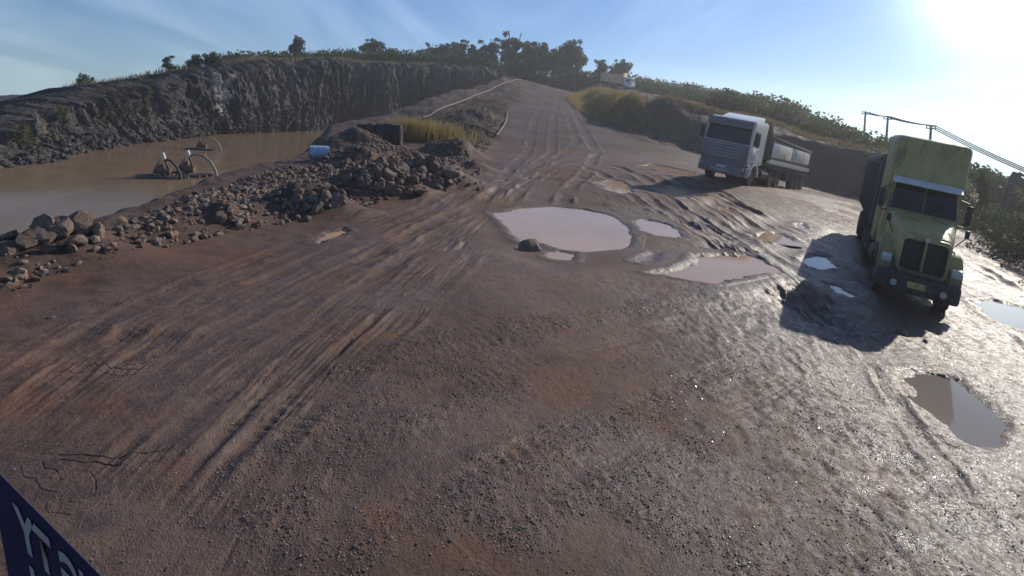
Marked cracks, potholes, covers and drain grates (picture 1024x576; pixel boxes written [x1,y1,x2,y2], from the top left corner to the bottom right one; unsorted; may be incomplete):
pothole [482,203,646,255]
pothole [637,250,796,286]
pothole [790,249,848,273]
pothole [626,217,694,240]
pothole [960,295,1024,332]
pothole [876,363,1024,461]
crack [68,357,156,376]
crack [21,442,178,515]
pothole [536,249,585,263]
pothole [295,225,360,247]
pothole [742,230,809,250]
pothole [586,178,643,195]
